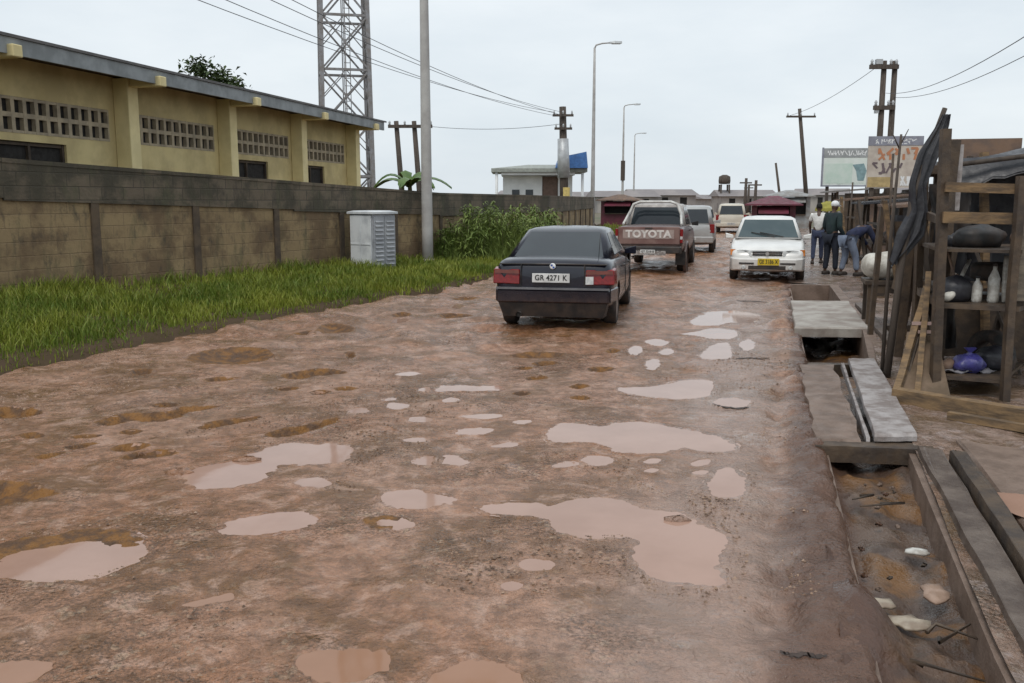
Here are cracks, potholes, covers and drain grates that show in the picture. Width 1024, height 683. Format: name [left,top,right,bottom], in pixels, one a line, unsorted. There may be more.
pothole [699,465,757,500]
pothole [370,488,464,512]
pothole [287,641,404,683]
pothole [0,405,49,420]
pothole [184,346,278,365]
pothole [469,494,738,590]
pothole [0,526,157,585]
pothole [210,509,325,539]
pothole [492,578,533,596]
pothole [540,420,741,456]
pothole [90,404,224,426]
pothole [611,379,720,401]
